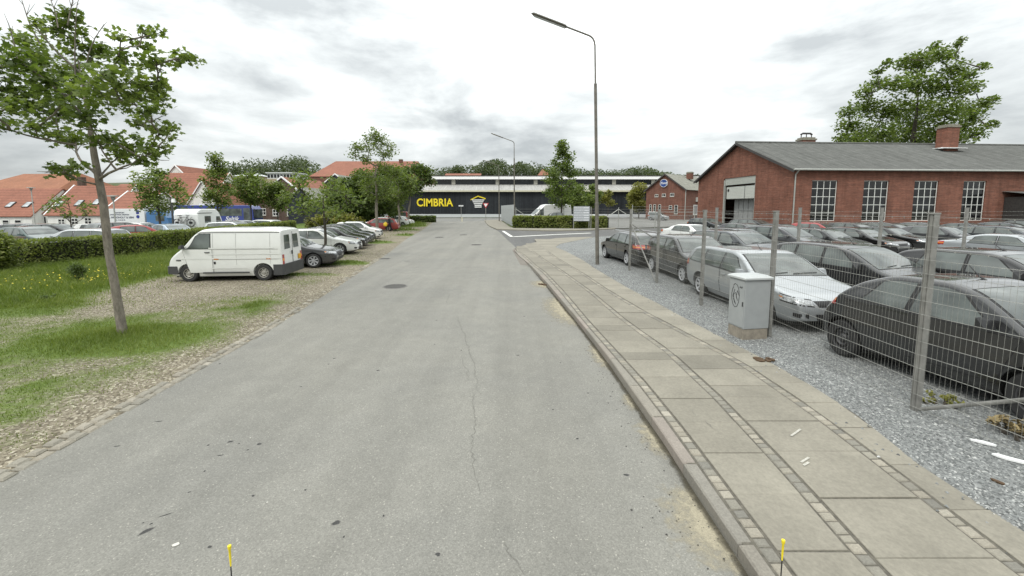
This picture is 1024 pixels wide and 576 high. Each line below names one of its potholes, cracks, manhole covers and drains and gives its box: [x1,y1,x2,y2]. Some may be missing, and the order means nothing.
crack [446,295,481,496]
